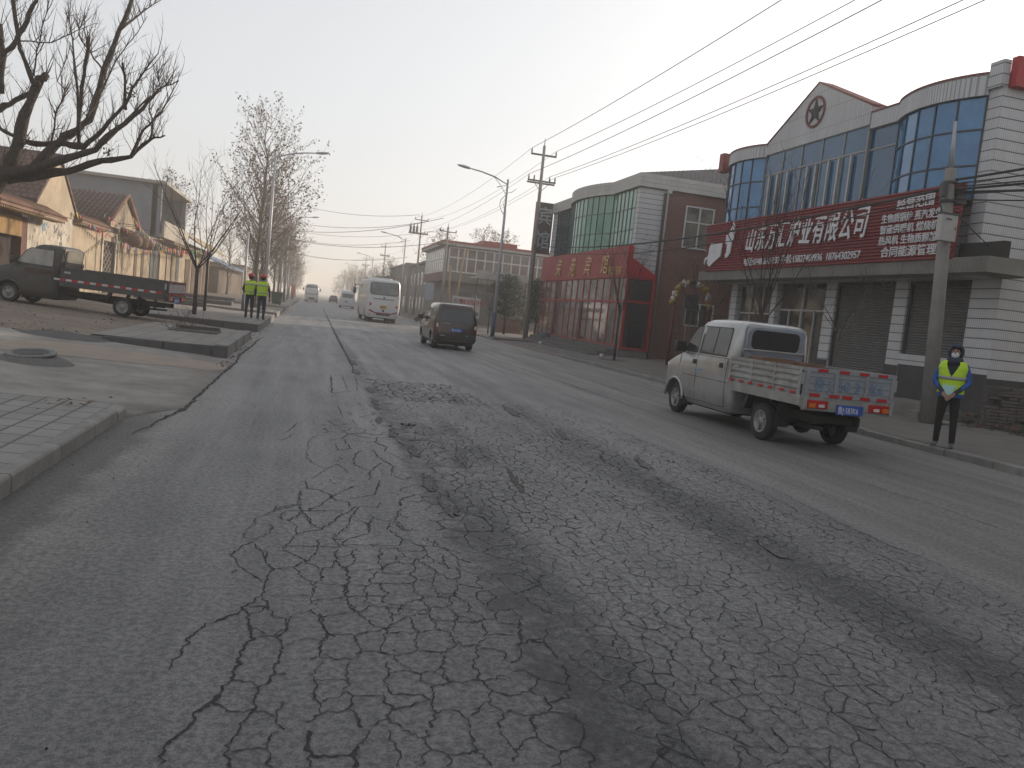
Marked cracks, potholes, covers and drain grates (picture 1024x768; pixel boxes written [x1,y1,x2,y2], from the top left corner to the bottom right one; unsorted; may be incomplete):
pothole [505,466,524,493]
crack [158,372,1024,768]
manhole cover [0,348,75,367]
crack [132,338,262,434]
